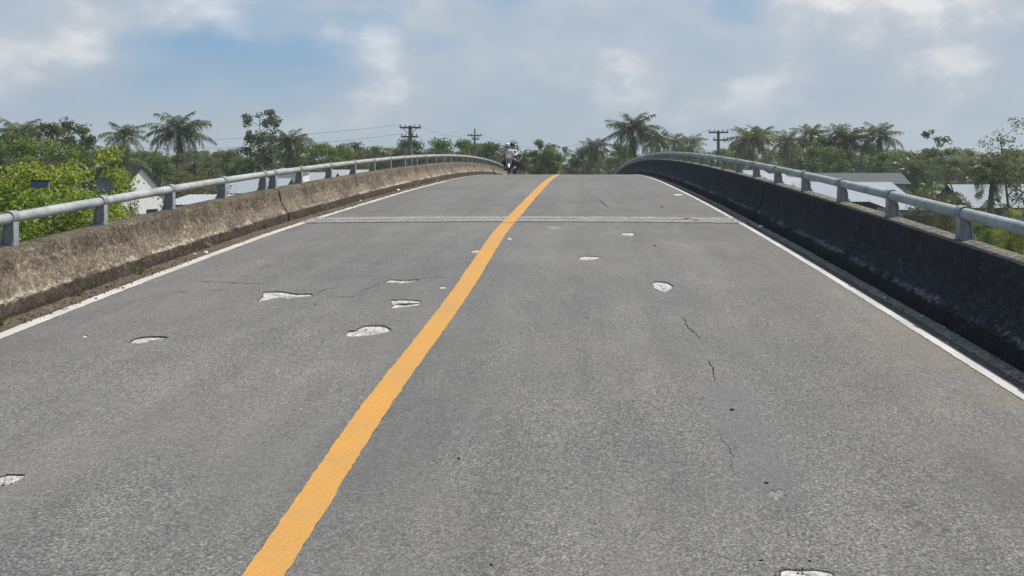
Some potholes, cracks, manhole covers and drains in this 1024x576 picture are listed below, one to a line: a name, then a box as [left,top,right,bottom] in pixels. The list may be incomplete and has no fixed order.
pothole [0,472,27,486]
pothole [257,290,318,301]
pothole [650,281,673,292]
pothole [341,323,392,336]
pothole [774,567,836,576]
pothole [125,335,169,345]
pothole [391,299,421,308]
